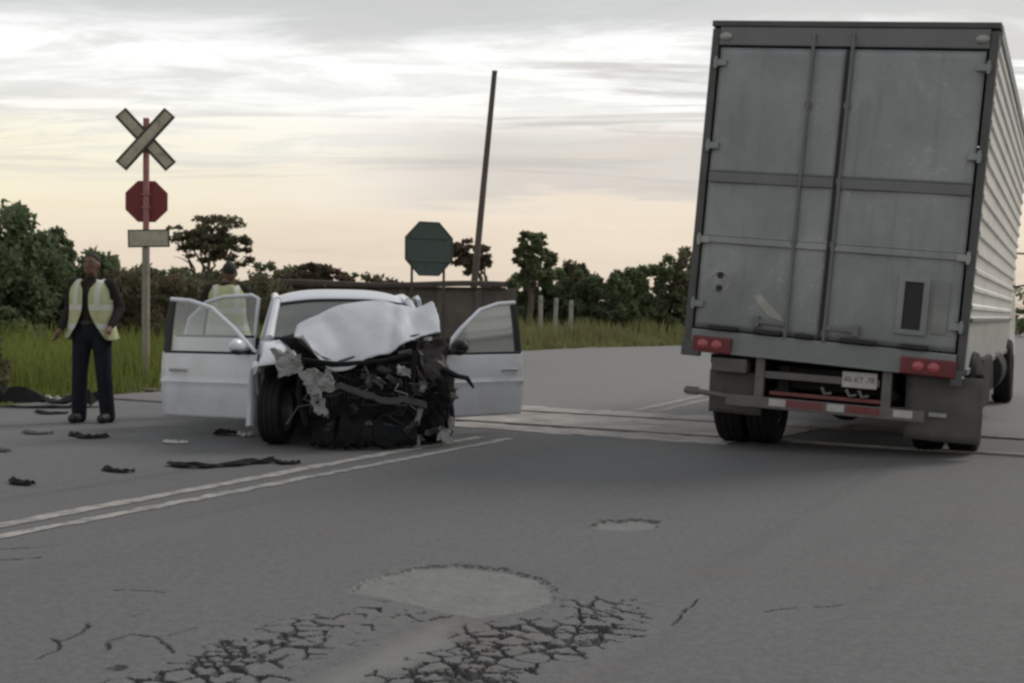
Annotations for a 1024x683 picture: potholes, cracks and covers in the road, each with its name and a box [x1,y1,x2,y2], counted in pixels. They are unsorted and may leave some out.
crack [669,599,699,626]
pothole [586,518,662,531]
crack [35,596,652,683]
